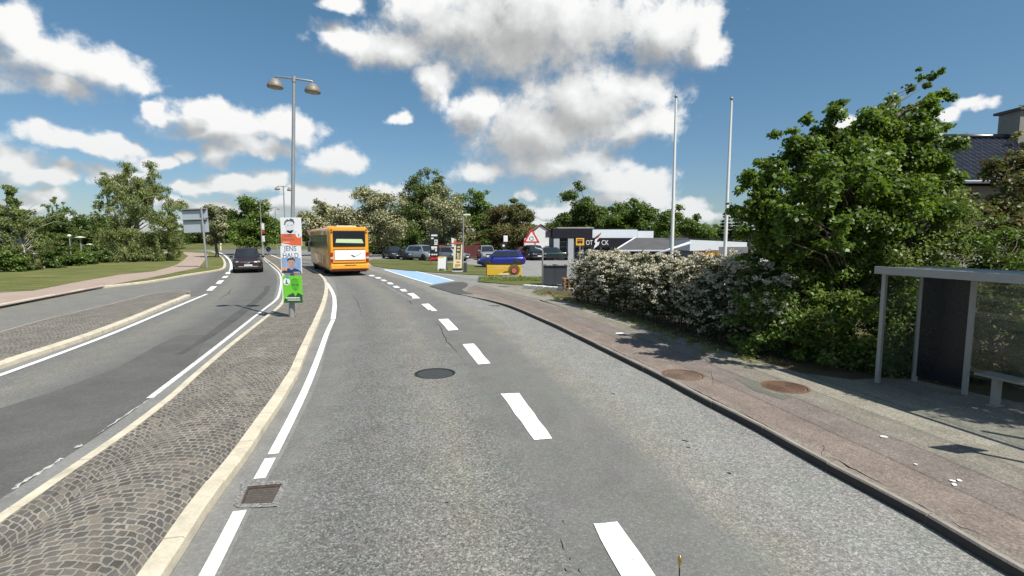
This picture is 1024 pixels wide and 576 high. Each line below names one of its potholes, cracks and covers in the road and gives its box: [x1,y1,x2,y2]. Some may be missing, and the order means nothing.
drain grate [241,484,282,504]
manhole cover [661,369,705,380]
manhole cover [760,380,811,394]
manhole cover [414,368,455,379]
crack [818,444,884,485]
